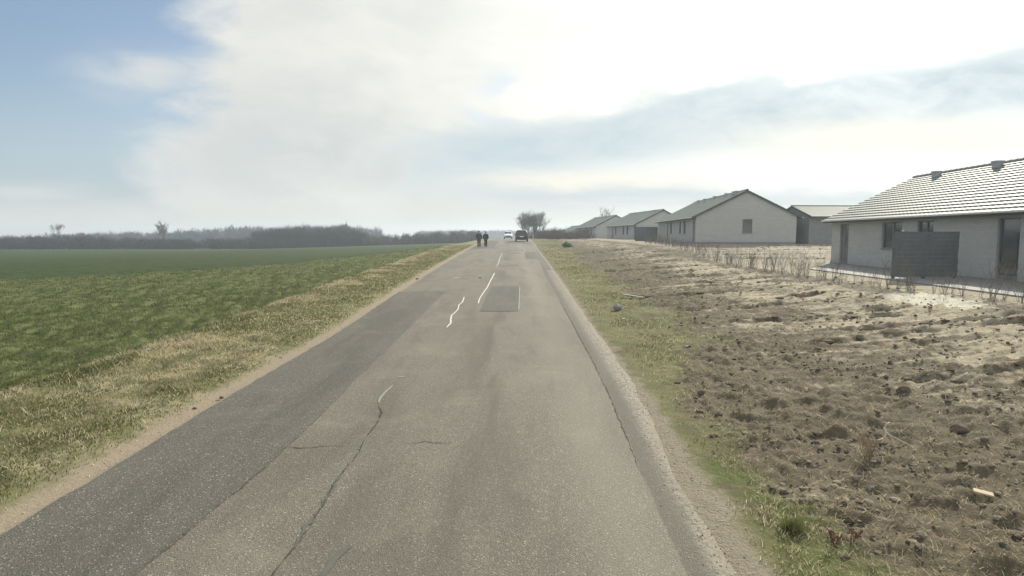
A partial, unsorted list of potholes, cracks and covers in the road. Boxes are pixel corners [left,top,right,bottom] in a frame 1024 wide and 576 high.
crack [271,404,383,576]
